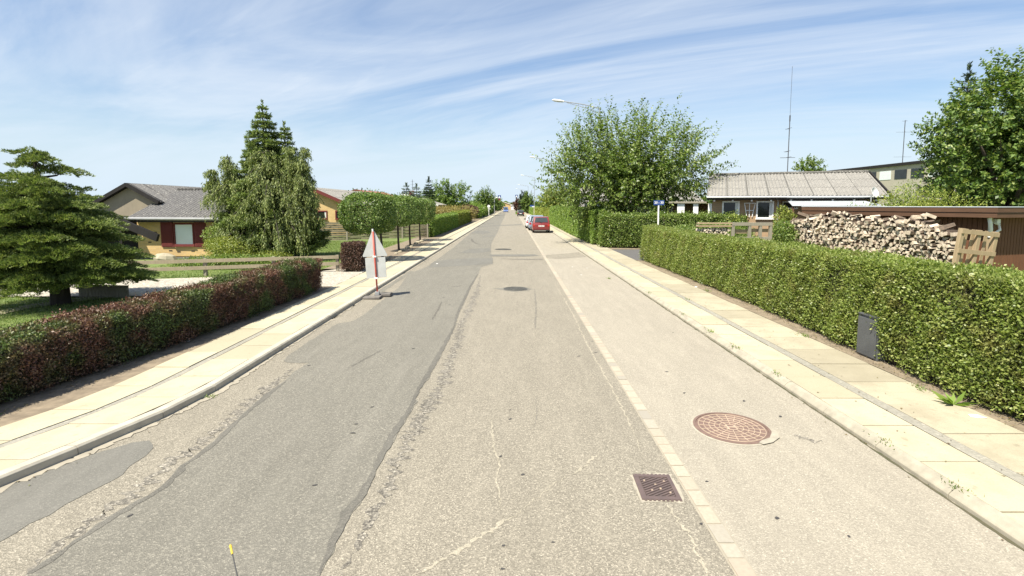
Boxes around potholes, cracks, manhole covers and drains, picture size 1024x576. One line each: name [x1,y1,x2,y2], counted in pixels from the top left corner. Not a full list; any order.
manhole cover [693,412,772,444]
drain grate [633,474,683,502]
